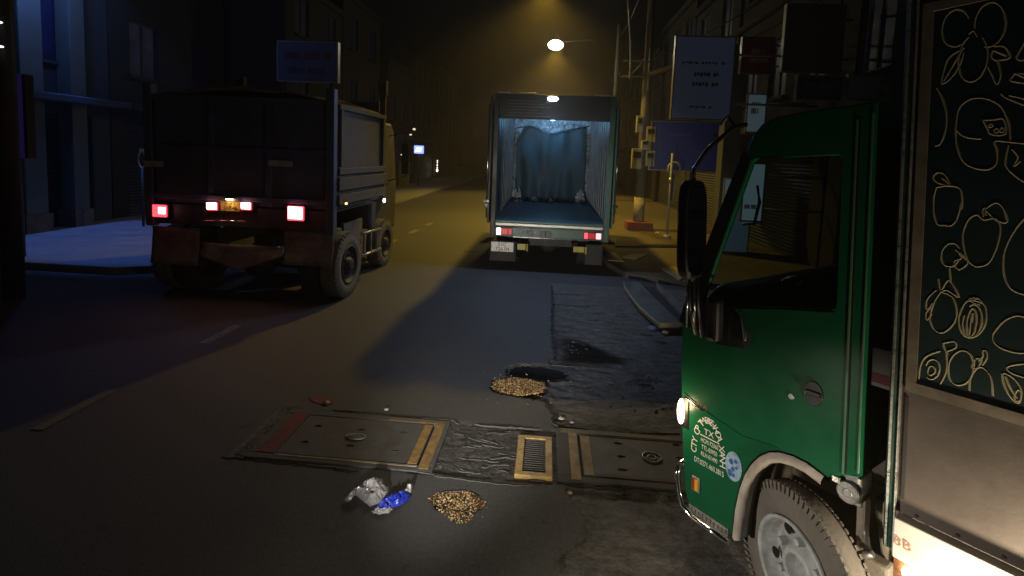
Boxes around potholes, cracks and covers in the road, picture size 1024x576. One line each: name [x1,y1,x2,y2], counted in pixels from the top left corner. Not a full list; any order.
pothole [505,363,572,382]
manhole cover [556,428,686,492]
drain grate [514,434,553,481]
manhole cover [243,409,451,474]
